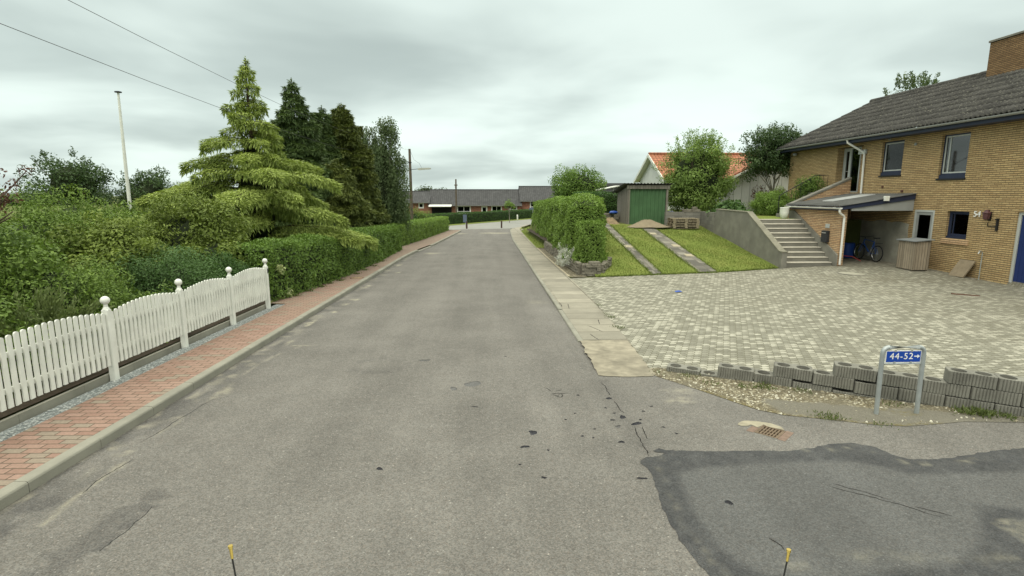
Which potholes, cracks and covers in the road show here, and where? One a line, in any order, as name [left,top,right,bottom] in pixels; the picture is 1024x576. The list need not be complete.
crack [603,384,649,456]
drain grate [746,425,794,441]
crack [82,400,212,494]
